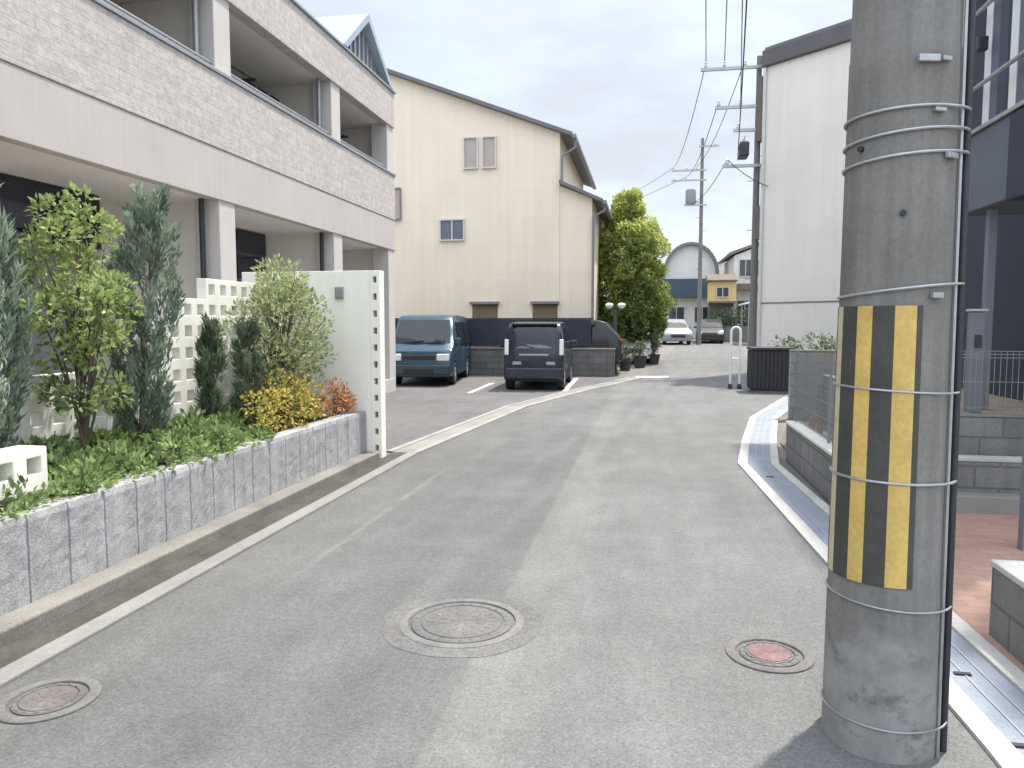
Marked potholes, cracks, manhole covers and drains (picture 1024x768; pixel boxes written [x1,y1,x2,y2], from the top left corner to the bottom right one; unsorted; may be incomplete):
manhole cover [0,676,102,725]
manhole cover [725,636,815,674]
manhole cover [380,593,544,658]
